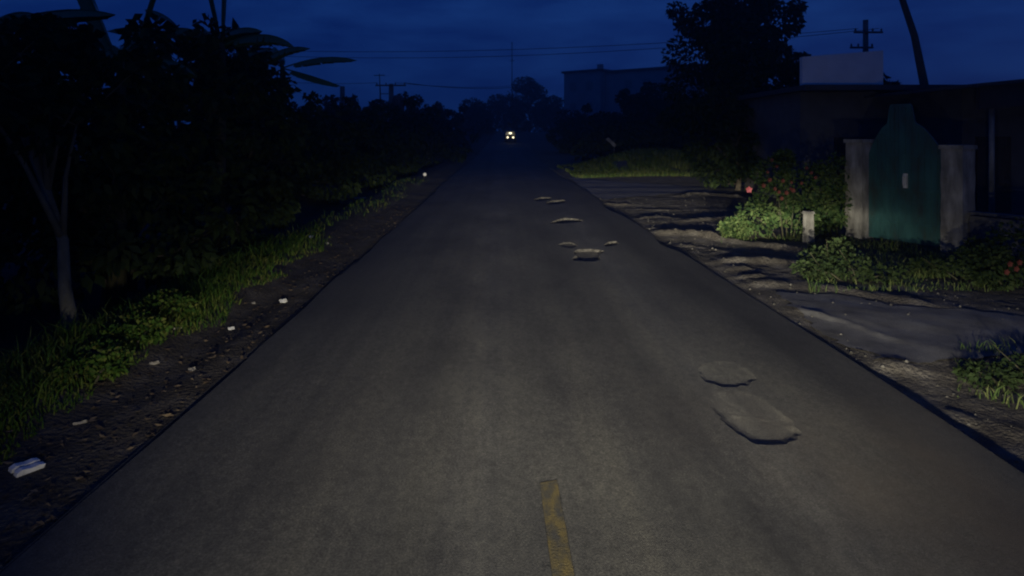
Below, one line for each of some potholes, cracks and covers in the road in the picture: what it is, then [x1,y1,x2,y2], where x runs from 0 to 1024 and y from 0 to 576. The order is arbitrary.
pothole [698,361,757,387]
pothole [709,391,802,445]
pothole [572,249,604,262]
